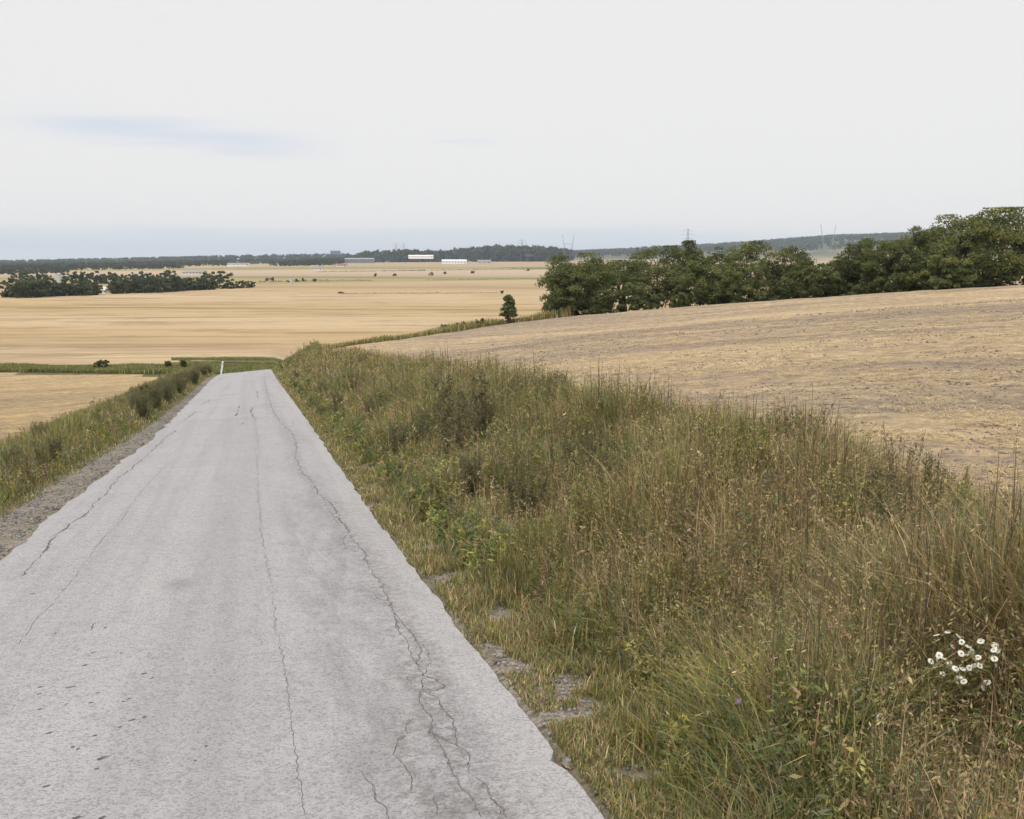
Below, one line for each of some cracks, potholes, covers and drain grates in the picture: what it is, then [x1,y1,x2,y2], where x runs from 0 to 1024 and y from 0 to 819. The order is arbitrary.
crack [227,392,306,815]
crack [264,378,507,819]
crack [19,431,175,643]
